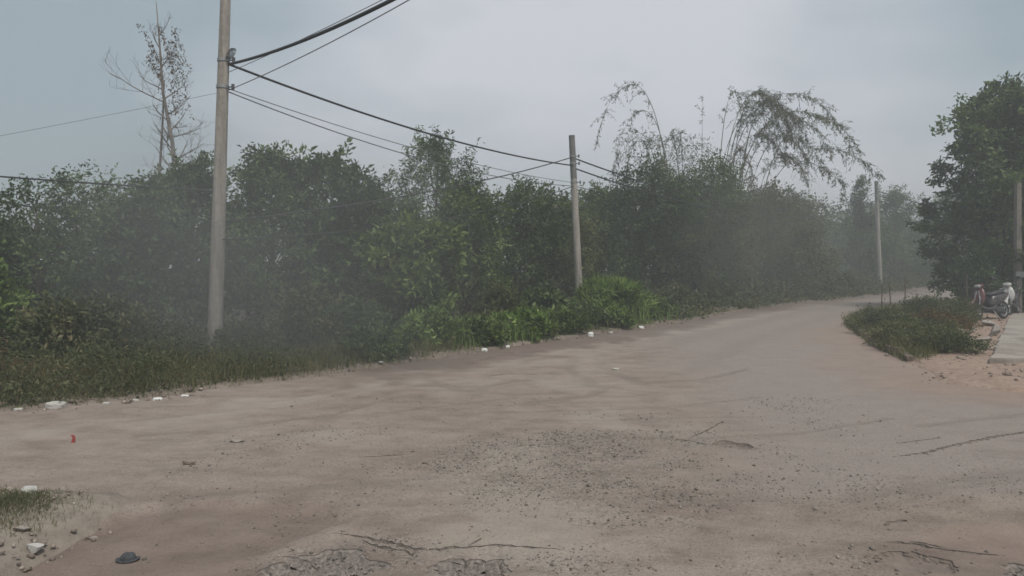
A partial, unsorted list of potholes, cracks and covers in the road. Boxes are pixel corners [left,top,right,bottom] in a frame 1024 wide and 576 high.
pothole [257,549,391,576]
crack [893,432,1024,457]
pothole [427,559,513,576]
pothole [713,440,754,450]
crack [340,533,561,556]
